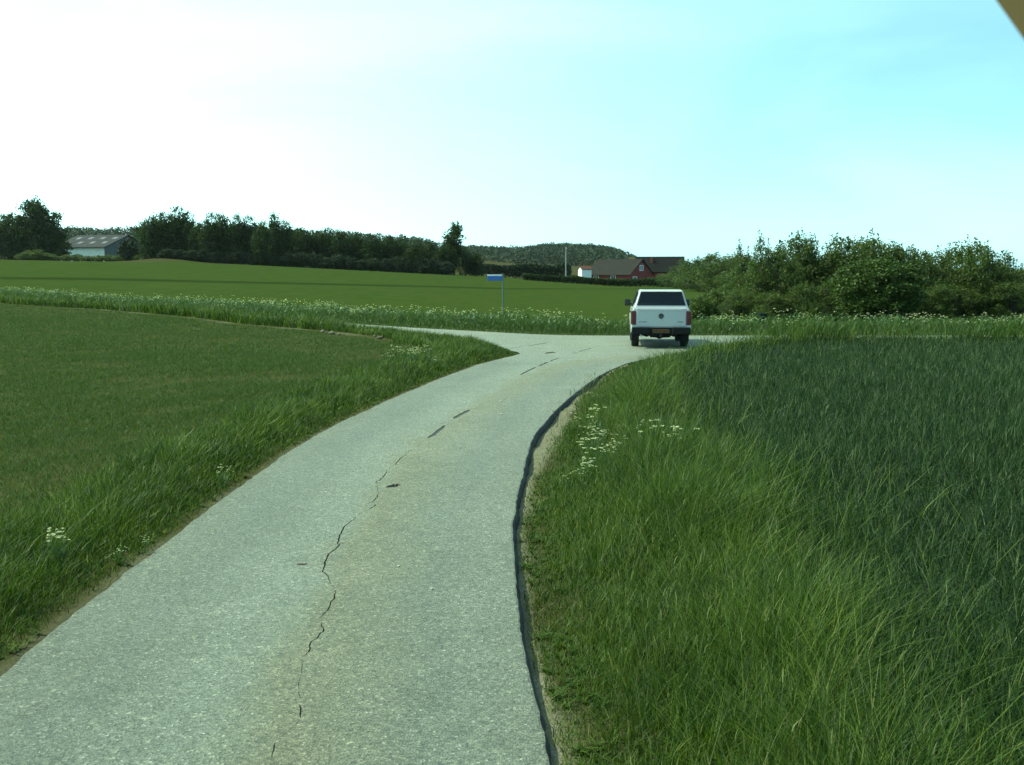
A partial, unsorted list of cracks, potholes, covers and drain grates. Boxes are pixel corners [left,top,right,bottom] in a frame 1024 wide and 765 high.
crack [427,410,470,438]
crack [272,453,407,754]
